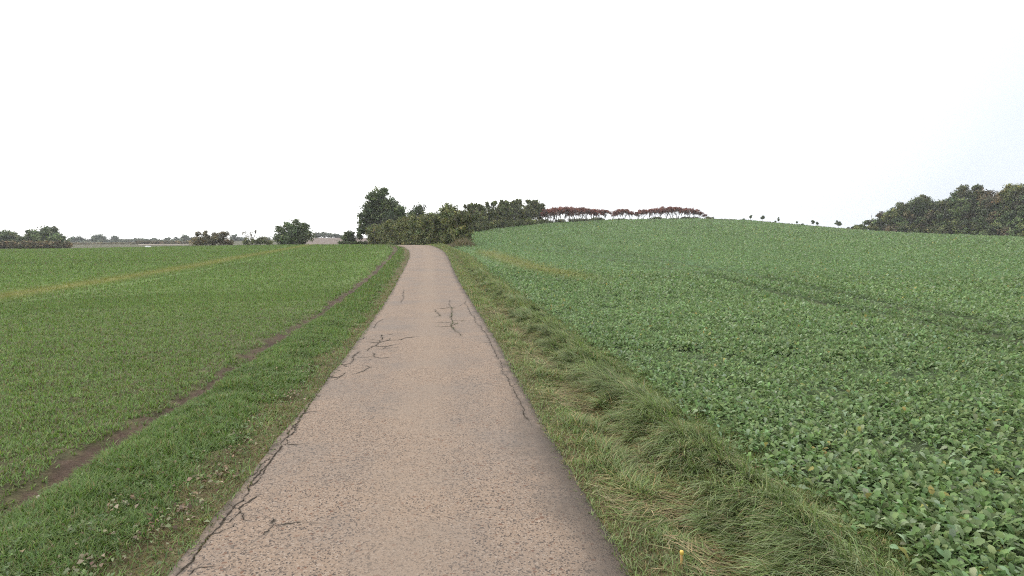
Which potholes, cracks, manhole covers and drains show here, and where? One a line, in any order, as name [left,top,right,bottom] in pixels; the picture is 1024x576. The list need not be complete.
crack [176,320,412,576]
crack [435,303,531,423]
